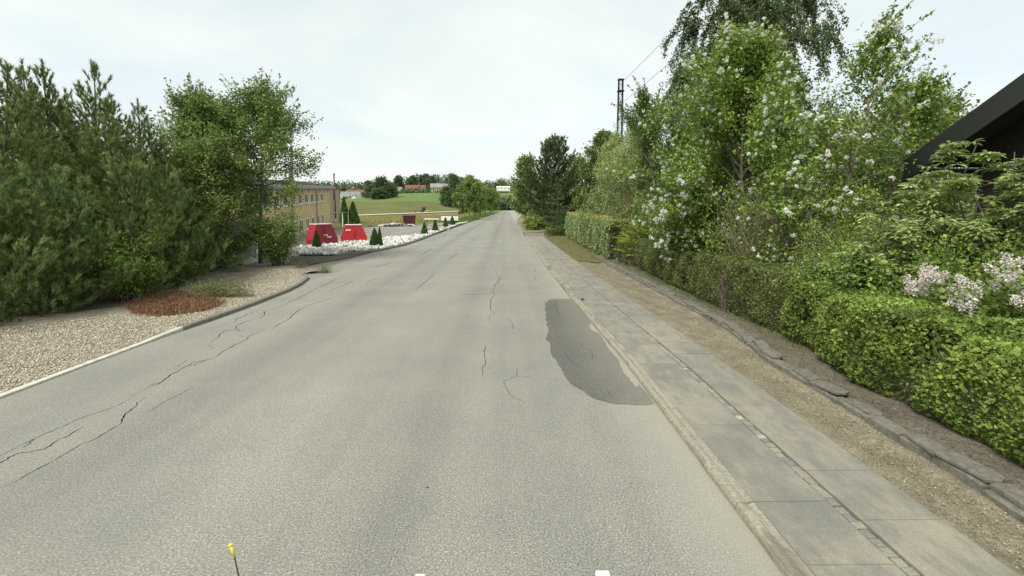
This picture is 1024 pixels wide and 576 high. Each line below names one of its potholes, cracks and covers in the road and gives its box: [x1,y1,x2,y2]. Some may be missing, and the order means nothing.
crack [0,261,395,487]
